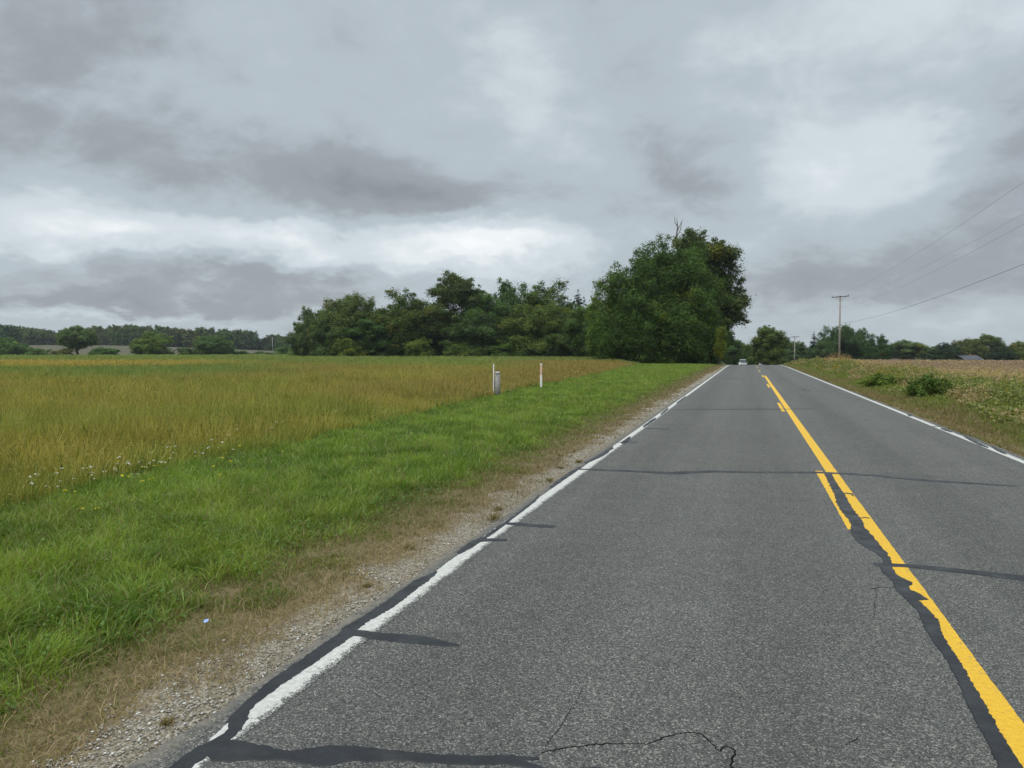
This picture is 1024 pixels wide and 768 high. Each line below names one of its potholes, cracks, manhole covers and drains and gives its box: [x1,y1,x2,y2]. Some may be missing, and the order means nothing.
crack [542,689,736,768]
